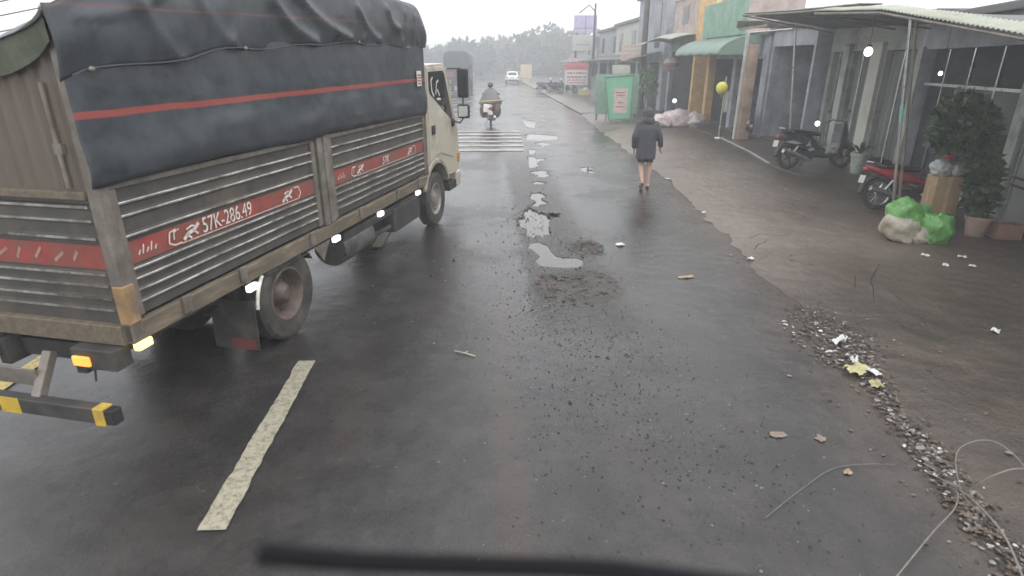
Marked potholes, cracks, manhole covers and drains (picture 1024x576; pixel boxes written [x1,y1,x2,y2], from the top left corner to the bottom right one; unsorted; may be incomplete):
crack [854,263,906,305]
pothole [515,207,551,239]
pothole [529,191,548,206]
pothole [528,240,584,269]
pothole [527,156,546,168]
pothole [567,239,605,258]
